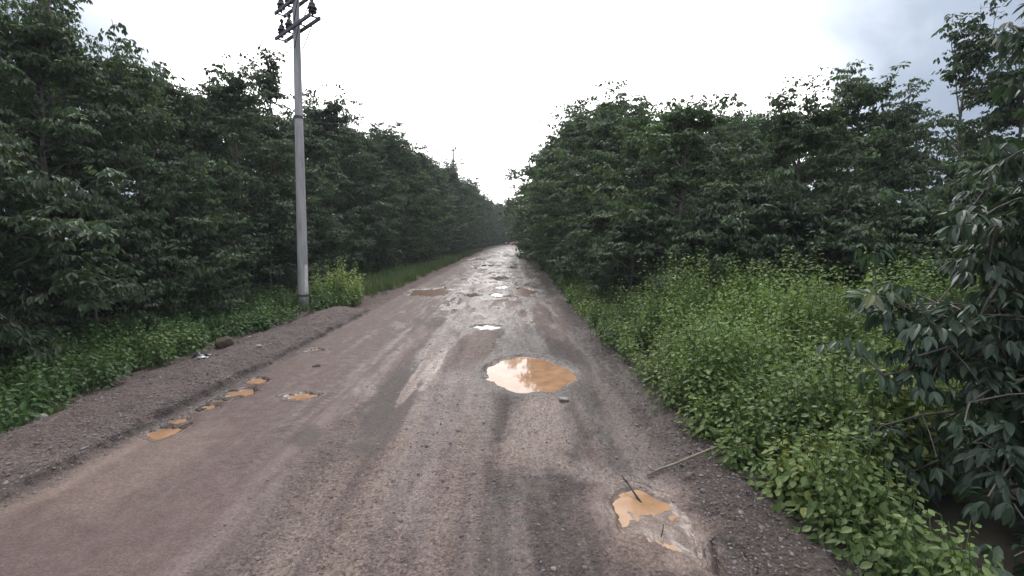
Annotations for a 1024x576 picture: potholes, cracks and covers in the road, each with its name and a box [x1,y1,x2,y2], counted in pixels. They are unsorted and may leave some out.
pothole [466,351,595,398]
pothole [275,389,327,402]
pothole [501,286,548,298]
pothole [600,480,718,576]
pothole [194,403,220,412]
pothole [217,386,262,400]
pothole [242,376,273,385]
pothole [137,423,191,442]
pothole [464,323,509,331]
pothole [159,414,194,429]
pothole [400,286,463,297]
